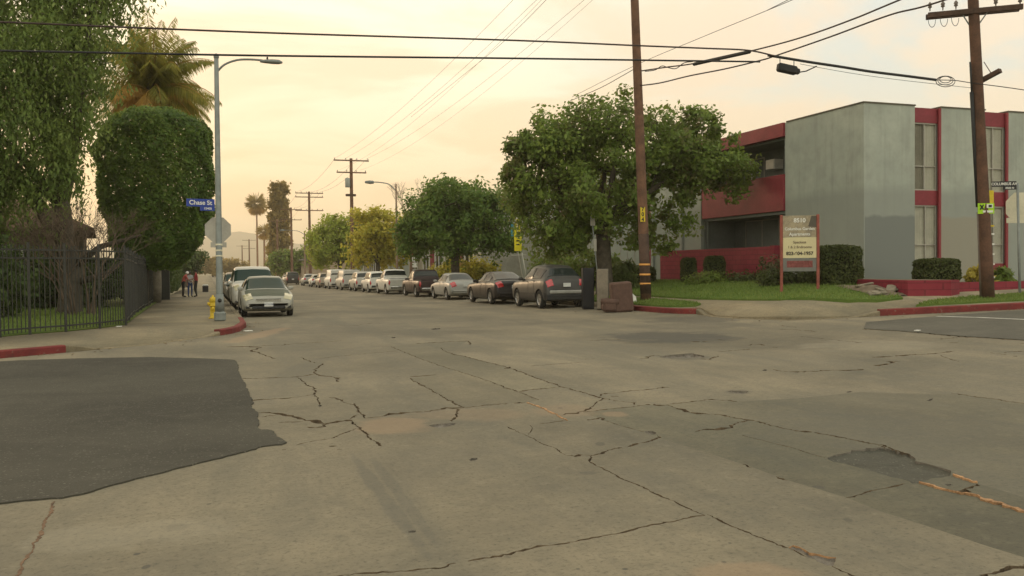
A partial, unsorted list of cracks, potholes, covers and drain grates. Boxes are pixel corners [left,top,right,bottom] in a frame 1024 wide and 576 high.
crack [508,399,910,456]
crack [618,339,763,360]
crack [773,337,958,372]
